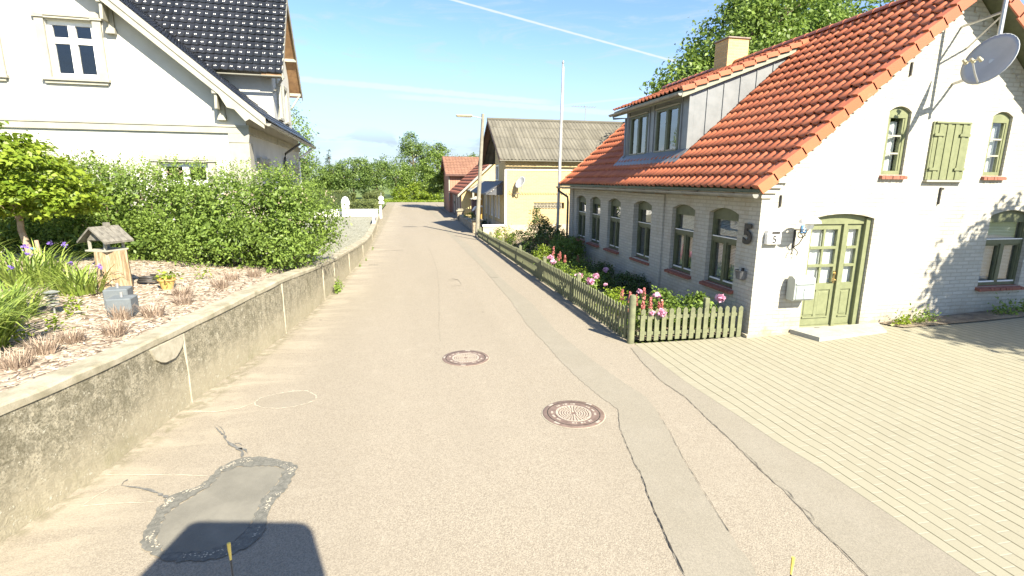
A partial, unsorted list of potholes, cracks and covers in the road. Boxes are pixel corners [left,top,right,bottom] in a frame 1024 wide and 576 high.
manhole cover [441,350,490,367]
crack [215,426,247,457]
manhole cover [542,400,606,429]
crack [618,412,685,574]
crack [83,474,207,506]
